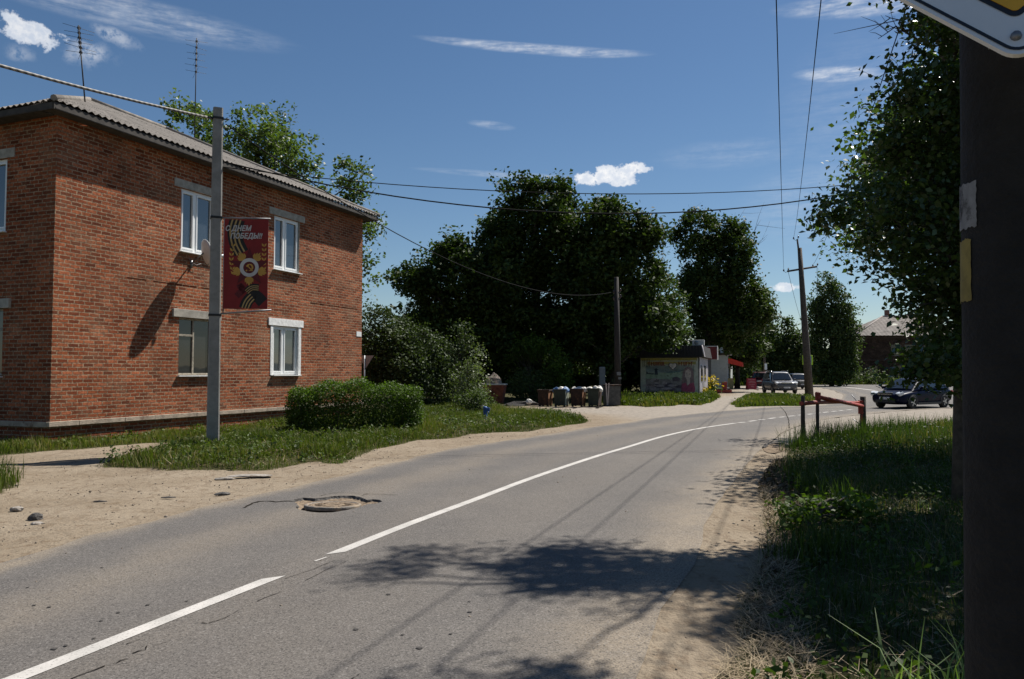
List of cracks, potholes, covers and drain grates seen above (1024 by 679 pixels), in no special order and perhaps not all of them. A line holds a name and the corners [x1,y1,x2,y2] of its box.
manhole cover [304,501,361,511]
crack [70,639,170,679]
